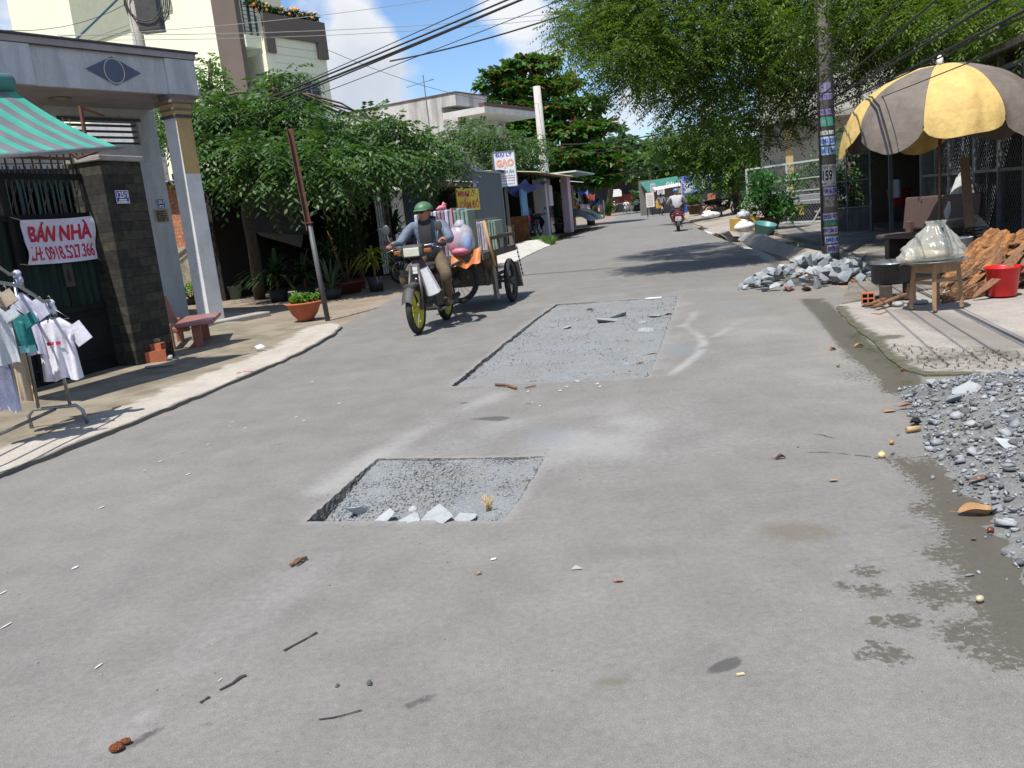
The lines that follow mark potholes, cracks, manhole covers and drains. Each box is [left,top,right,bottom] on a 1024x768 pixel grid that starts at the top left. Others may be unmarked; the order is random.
pothole [452,296,678,386]
pothole [305,456,545,522]
